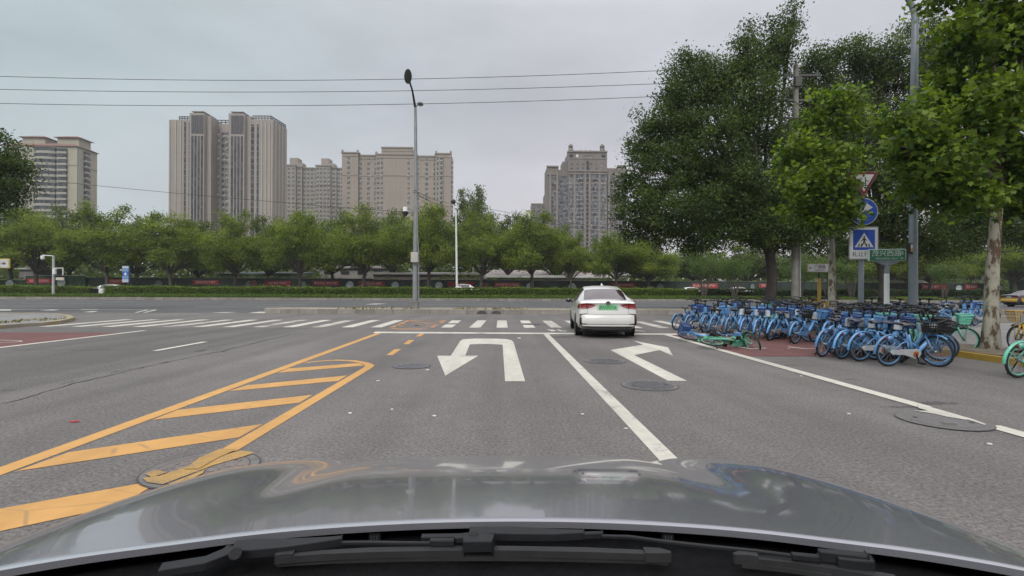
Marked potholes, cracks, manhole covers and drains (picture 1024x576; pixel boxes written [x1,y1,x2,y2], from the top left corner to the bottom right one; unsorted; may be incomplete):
manhole cover [621,380,679,391]
manhole cover [136,449,261,489]
manhole cover [894,410,997,431]
